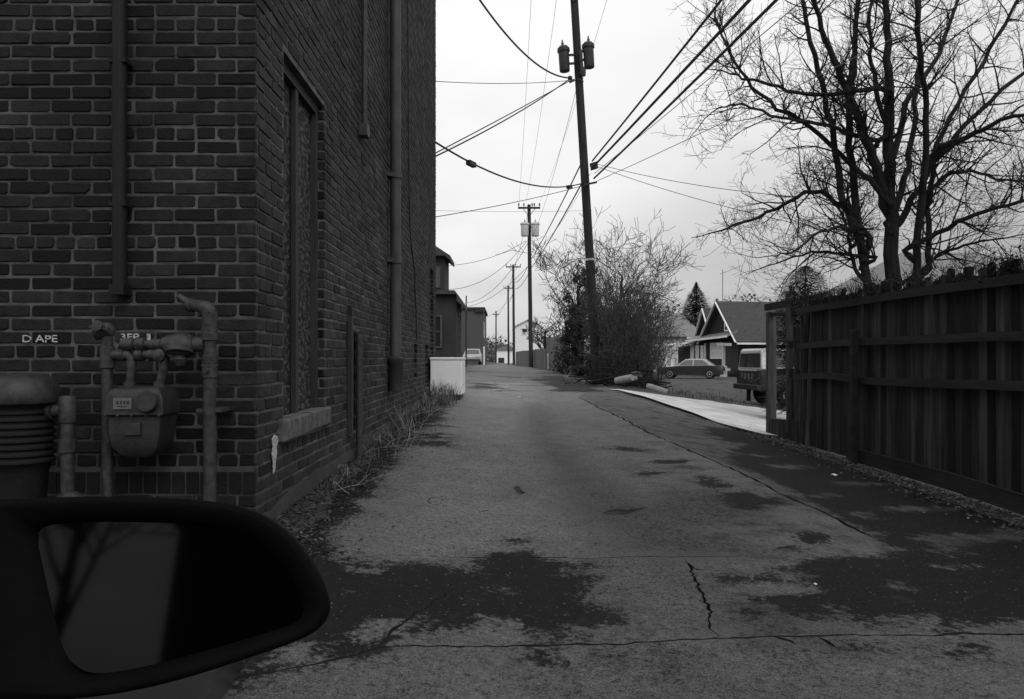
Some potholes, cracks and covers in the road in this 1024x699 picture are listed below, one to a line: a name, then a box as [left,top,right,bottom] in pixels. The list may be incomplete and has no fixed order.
crack [235,556,1024,680]
